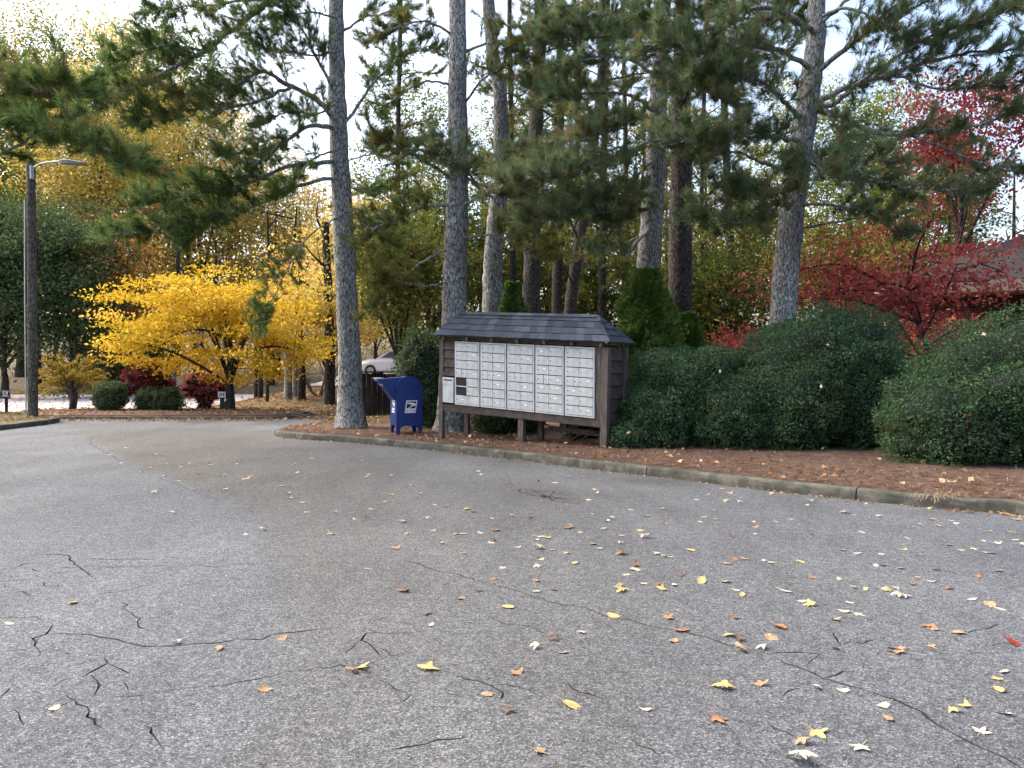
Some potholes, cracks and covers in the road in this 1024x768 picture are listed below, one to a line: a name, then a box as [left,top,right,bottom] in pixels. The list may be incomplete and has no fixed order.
crack [378,737,467,754]
crack [0,554,411,728]
crack [140,714,166,765]
crack [406,560,1022,768]
